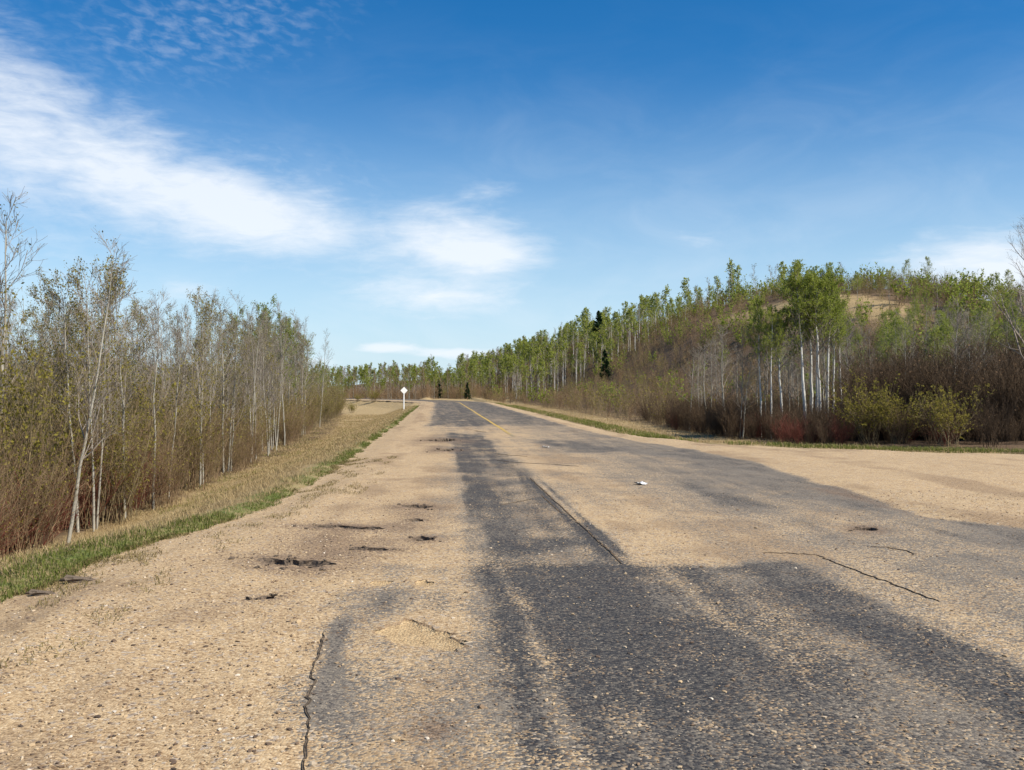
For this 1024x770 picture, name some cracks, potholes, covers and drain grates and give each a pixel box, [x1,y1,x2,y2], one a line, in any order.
crack [763,552,940,602]
crack [301,632,325,770]
pothole [257,558,336,568]
